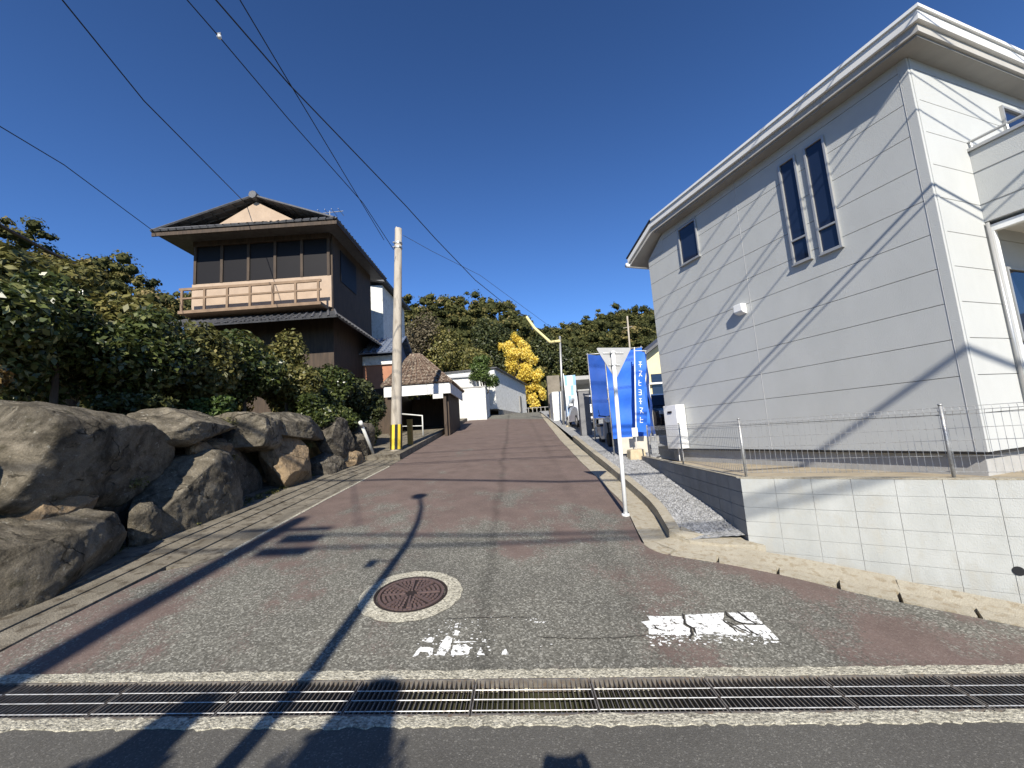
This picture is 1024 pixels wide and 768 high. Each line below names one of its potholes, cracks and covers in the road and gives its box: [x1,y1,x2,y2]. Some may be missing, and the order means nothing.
drain grate [341,679,475,717]
drain grate [471,677,599,716]
drain grate [84,681,250,720]
drain grate [932,673,1024,712]
crack [682,613,697,639]
drain grate [0,683,26,697]
drain grate [590,676,730,715]
drain grate [818,674,994,712]
crack [723,611,763,637]
drain grate [704,675,860,714]
drain grate [213,680,362,718]
manhole cover [357,571,463,622]
